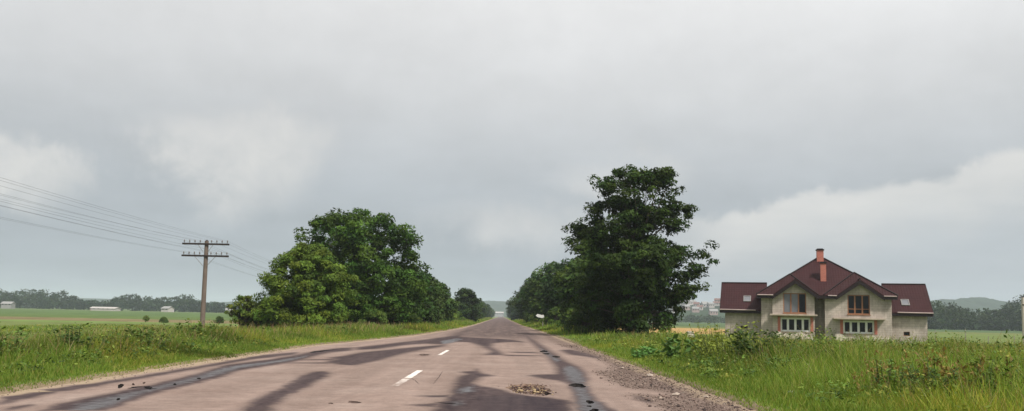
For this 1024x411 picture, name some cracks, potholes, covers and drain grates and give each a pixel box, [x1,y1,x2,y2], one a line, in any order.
pothole [498,384,557,396]
